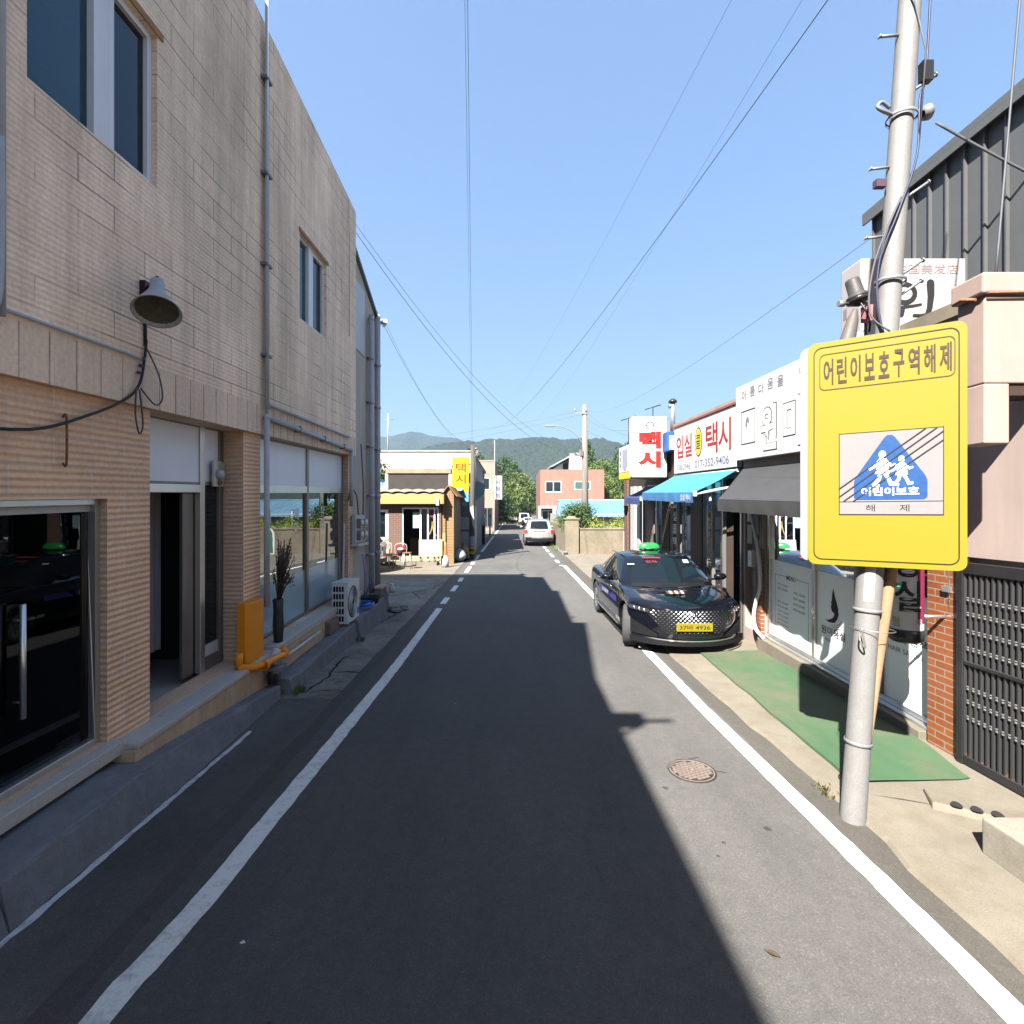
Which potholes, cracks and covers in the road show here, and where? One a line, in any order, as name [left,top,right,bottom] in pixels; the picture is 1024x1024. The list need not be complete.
manhole cover [668,759,717,783]
